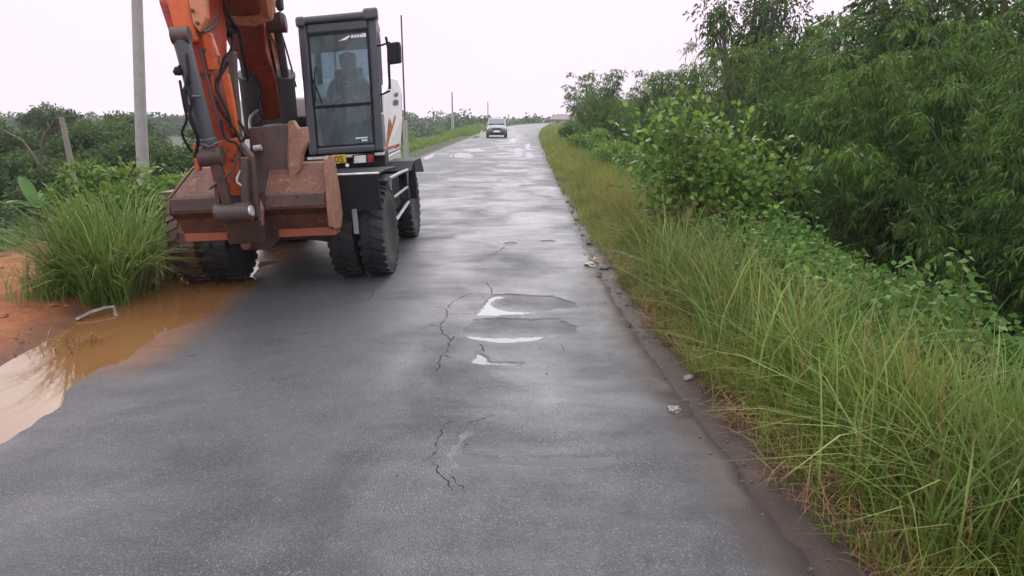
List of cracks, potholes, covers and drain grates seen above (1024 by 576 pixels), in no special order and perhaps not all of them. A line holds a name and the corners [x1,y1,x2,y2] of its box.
crack [424,417,486,492]
pothole [461,317,578,344]
pothole [469,351,526,365]
pothole [446,430,617,469]
pothole [475,293,579,316]
crack [427,283,492,371]
